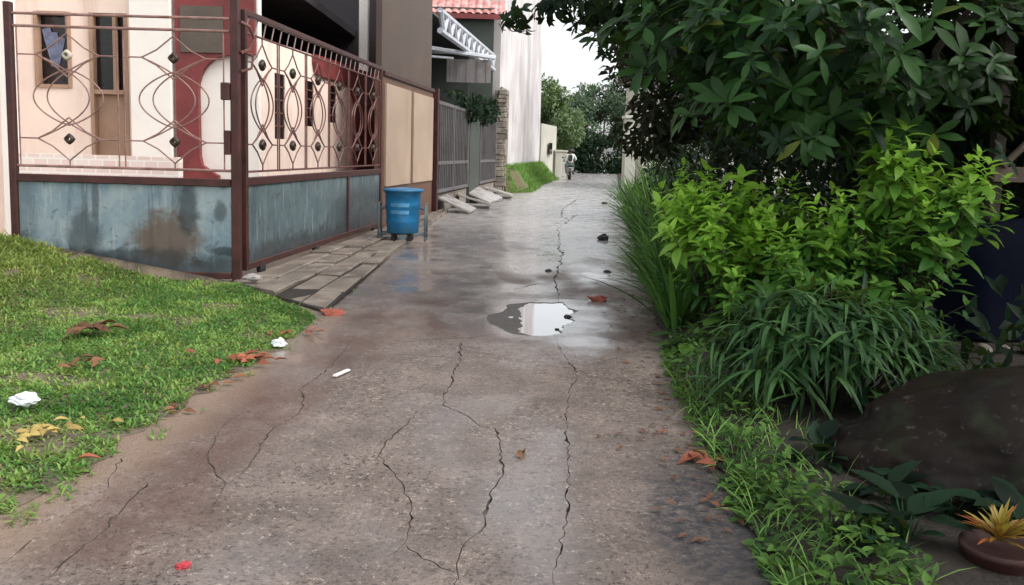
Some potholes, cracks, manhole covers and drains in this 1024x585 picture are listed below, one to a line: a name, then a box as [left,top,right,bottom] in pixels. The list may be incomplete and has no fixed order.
crack [42,458,149,583]
crack [199,344,349,515]
crack [377,199,644,585]
